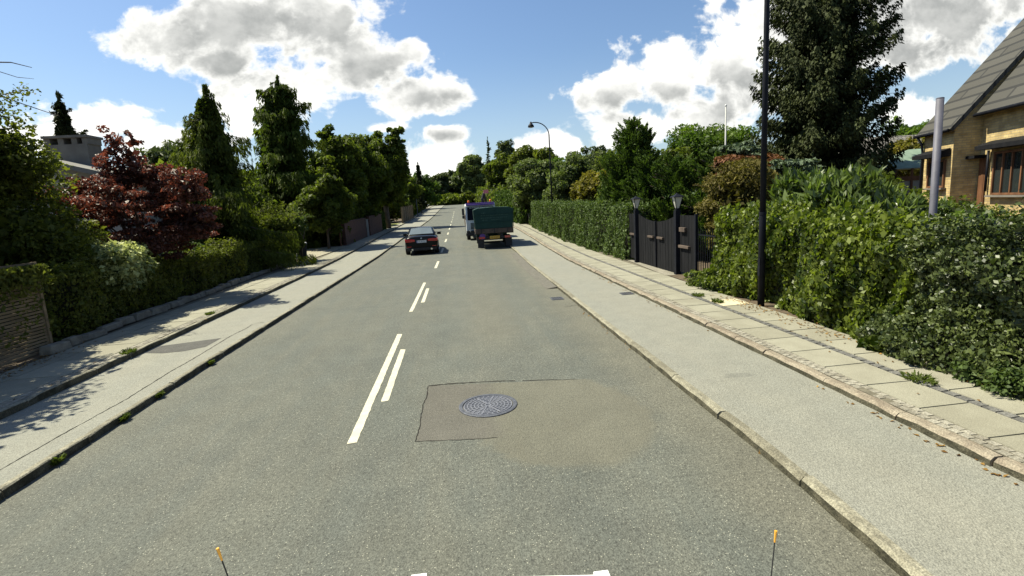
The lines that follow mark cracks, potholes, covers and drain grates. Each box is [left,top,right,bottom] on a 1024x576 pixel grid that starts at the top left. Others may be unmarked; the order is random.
manhole cover [459,394,517,418]
